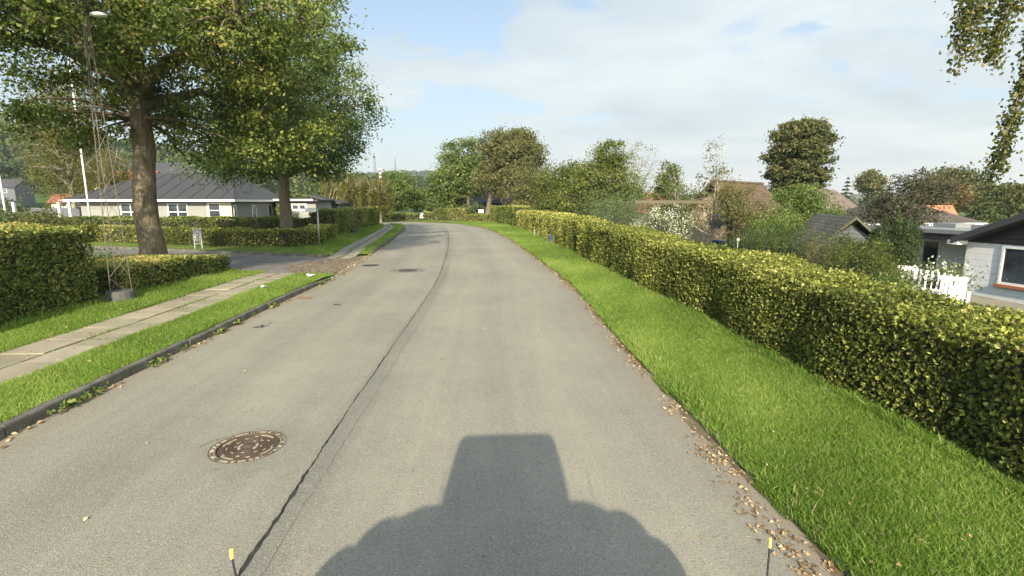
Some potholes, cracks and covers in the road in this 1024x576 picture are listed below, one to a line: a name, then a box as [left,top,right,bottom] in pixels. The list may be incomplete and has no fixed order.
manhole cover [207,430,286,469]
